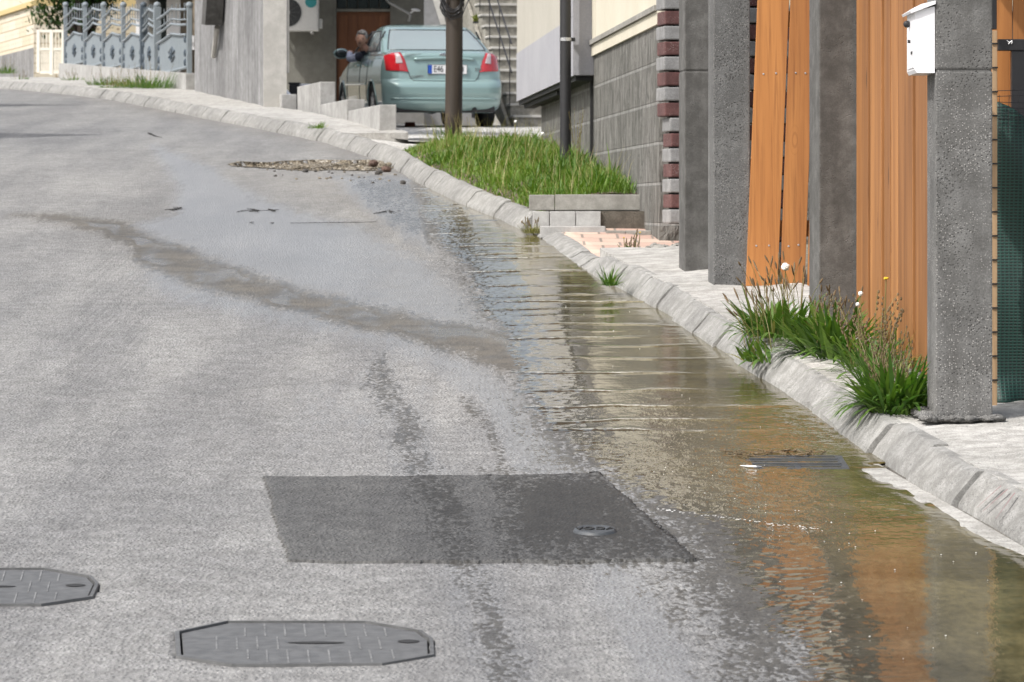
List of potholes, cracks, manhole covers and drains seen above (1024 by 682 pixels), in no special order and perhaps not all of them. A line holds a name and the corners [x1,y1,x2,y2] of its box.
crack [311,210,392,223]
utility cover [573,525,617,536]
drain grate [744,455,850,469]
manhole cover [174,620,434,667]
crack [238,208,279,224]
pothole [229,159,393,171]
manhole cover [0,568,100,607]
